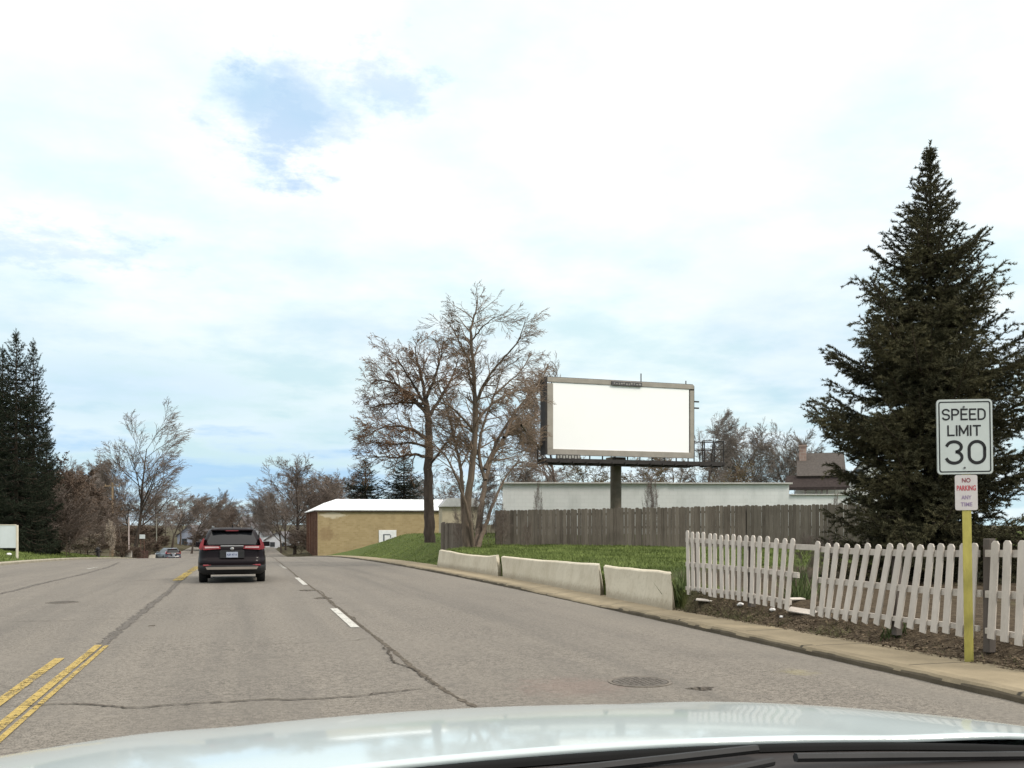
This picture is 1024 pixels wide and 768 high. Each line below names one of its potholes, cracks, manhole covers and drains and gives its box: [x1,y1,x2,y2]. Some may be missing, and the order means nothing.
crack [11,687,429,708]
crack [382,646,434,685]
manhole cover [608,676,672,687]
